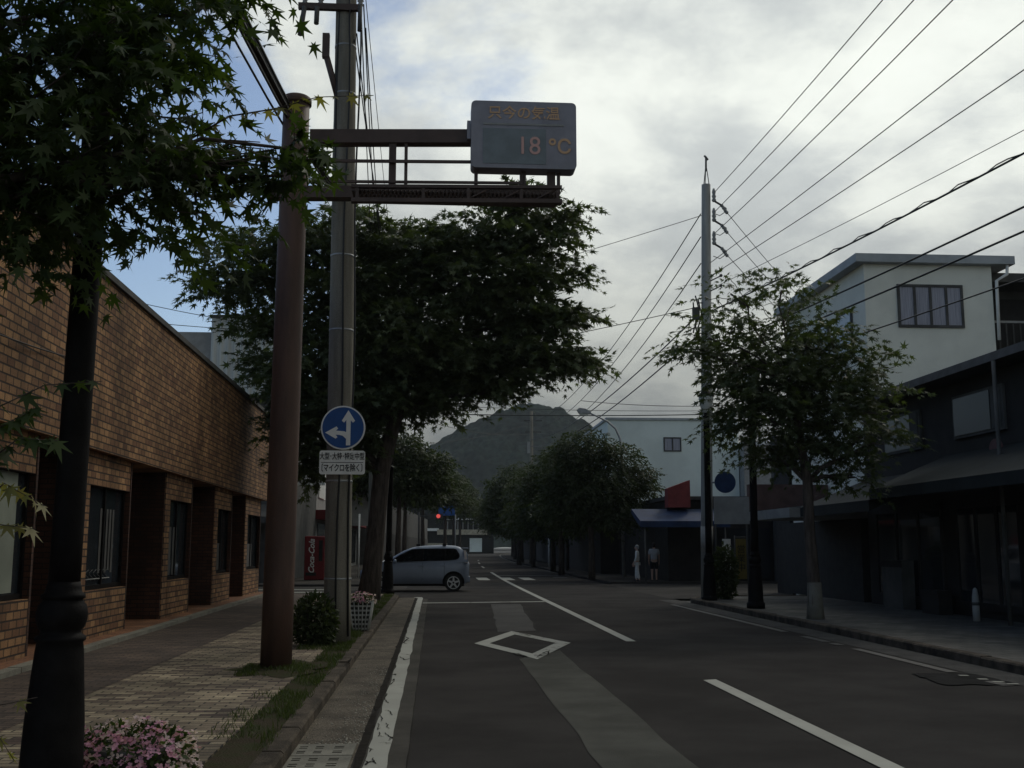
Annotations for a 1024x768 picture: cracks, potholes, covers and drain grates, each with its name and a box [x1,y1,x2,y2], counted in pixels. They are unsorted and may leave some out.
crack [365,637,410,765]
